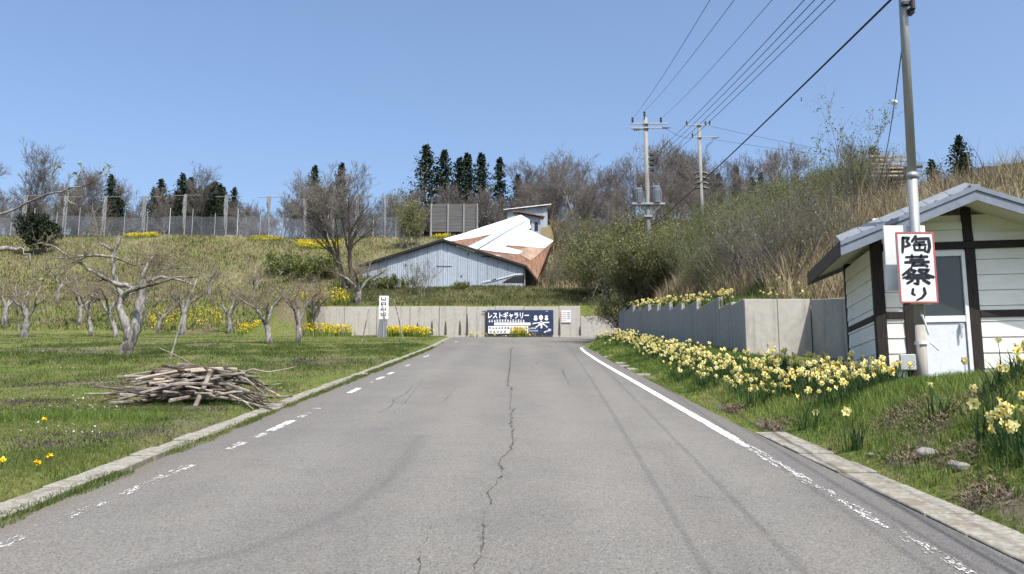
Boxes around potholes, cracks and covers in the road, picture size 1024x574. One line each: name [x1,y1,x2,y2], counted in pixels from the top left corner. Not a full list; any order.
crack [473,345,552,574]
